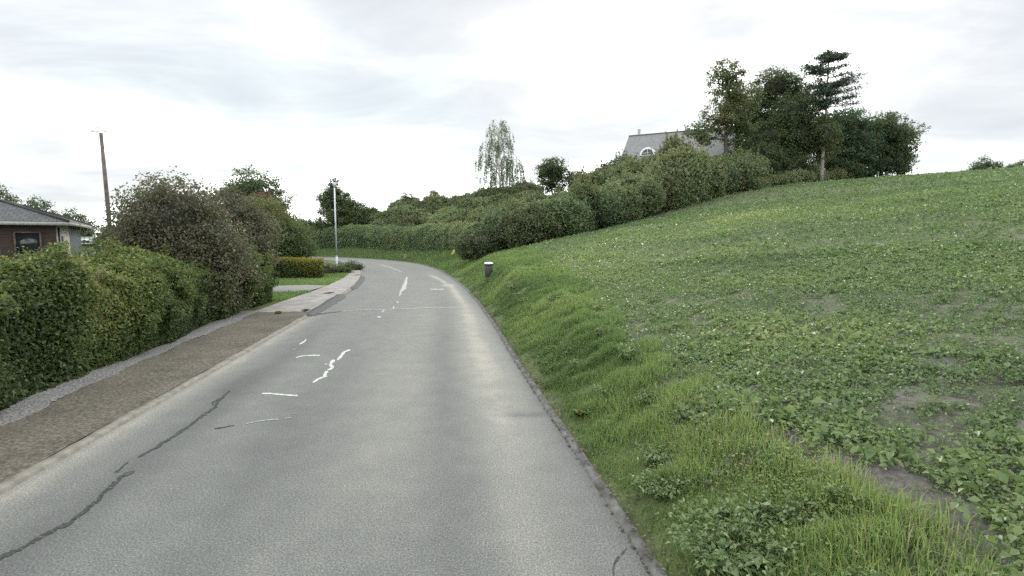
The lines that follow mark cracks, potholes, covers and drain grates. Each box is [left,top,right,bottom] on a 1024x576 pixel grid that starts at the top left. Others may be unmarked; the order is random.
crack [0,390,297,560]
crack [612,547,627,576]
